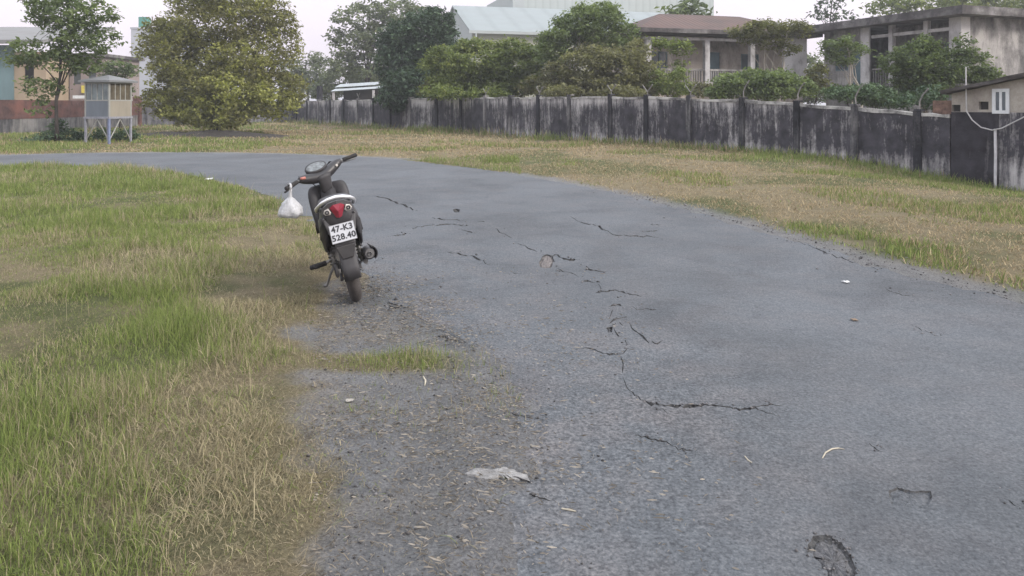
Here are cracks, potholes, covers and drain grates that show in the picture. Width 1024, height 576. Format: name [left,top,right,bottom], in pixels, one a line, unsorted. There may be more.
pothole [539,254,555,268]
crack [636,435,691,451]
pothole [807,535,857,576]
crack [376,196,781,418]
pothole [889,487,933,512]
